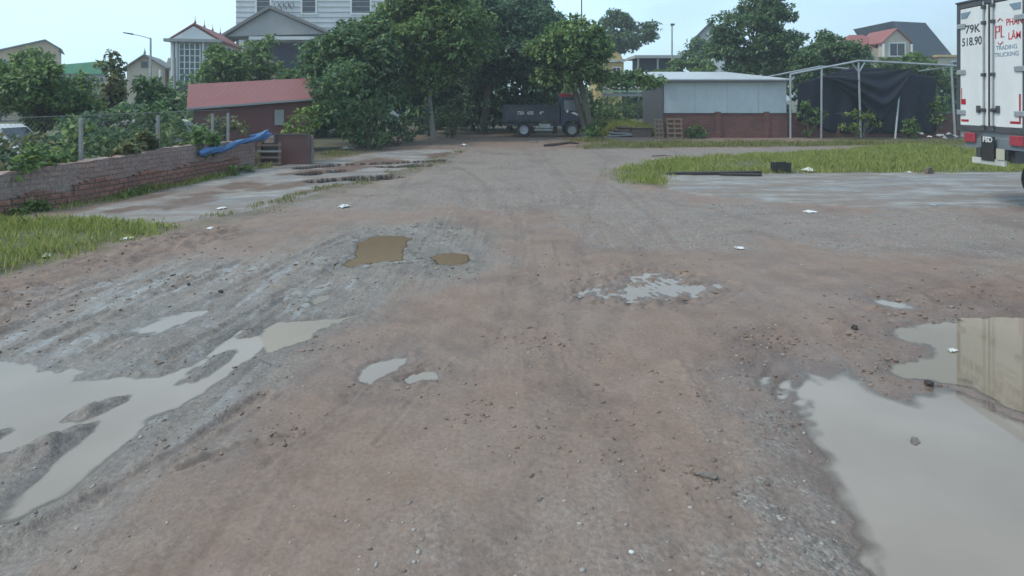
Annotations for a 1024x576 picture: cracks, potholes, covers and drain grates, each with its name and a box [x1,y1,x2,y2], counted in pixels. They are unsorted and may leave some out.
pothole [331,232,422,271]
pothole [340,347,426,394]
pothole [253,308,378,362]
pothole [379,356,465,394]
pothole [418,248,482,268]
